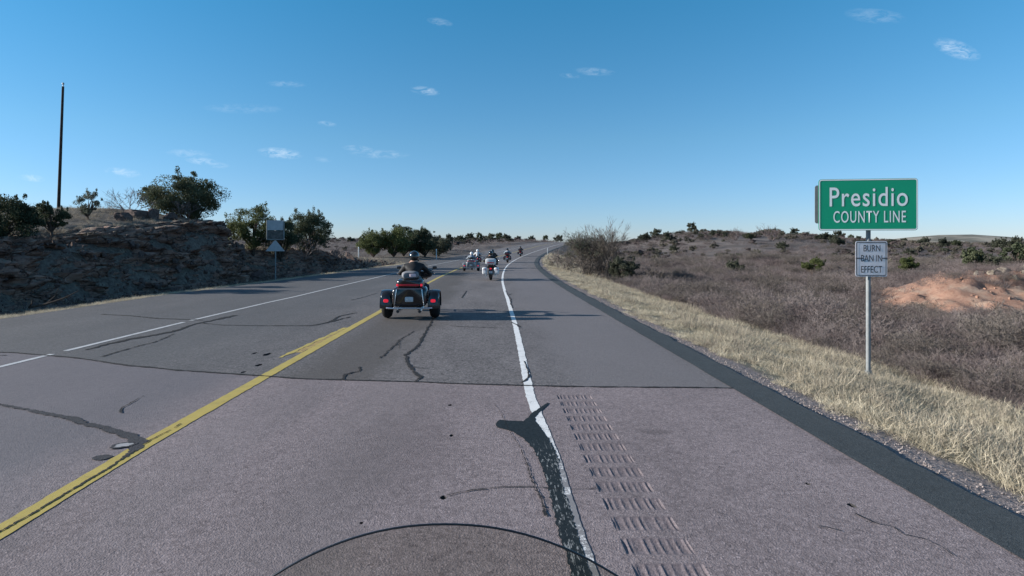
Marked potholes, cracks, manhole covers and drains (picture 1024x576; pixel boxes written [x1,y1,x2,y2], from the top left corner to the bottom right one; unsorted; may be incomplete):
crack [820,513,953,555]
crack [0,423,181,531]
crack [379,318,434,381]
crack [447,405,596,516]
crack [85,293,376,357]
